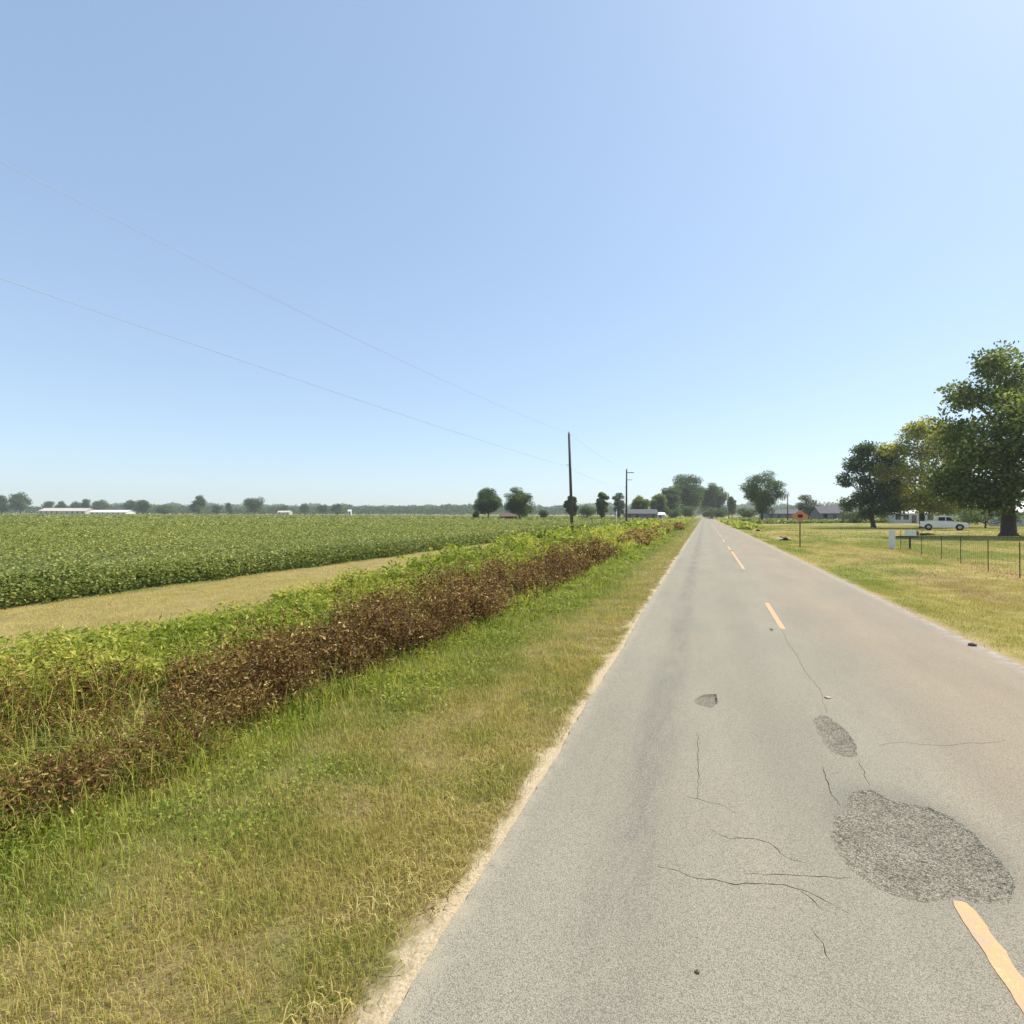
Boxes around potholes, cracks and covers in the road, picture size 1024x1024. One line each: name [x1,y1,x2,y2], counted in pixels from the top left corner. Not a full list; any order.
pothole [694,694,718,708]
crack [657,830,848,913]
crack [686,735,730,810]
